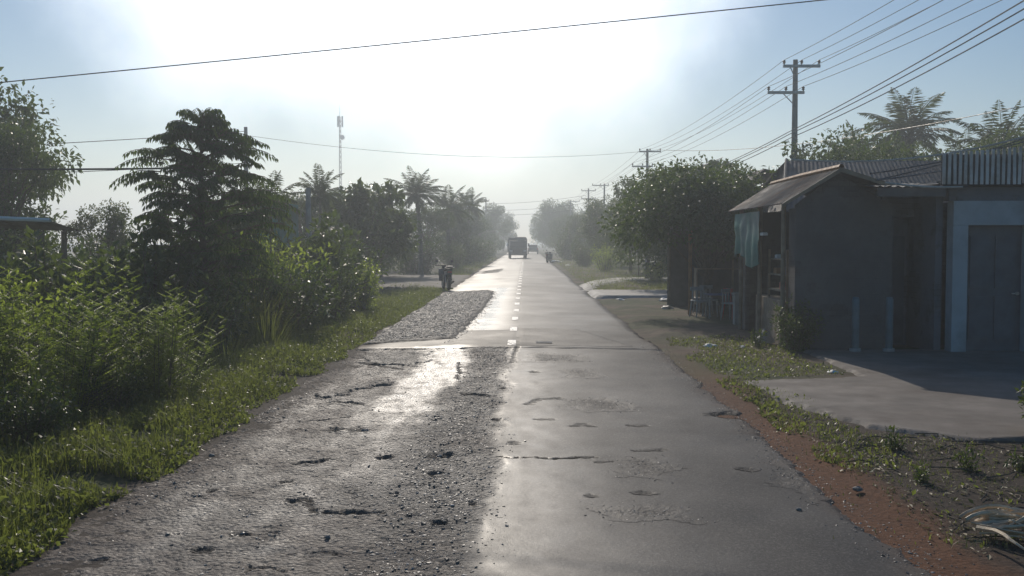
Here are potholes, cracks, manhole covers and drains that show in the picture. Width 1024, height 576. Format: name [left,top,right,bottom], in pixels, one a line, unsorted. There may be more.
pothole [703,410,742,420]
crack [359,362,405,370]
